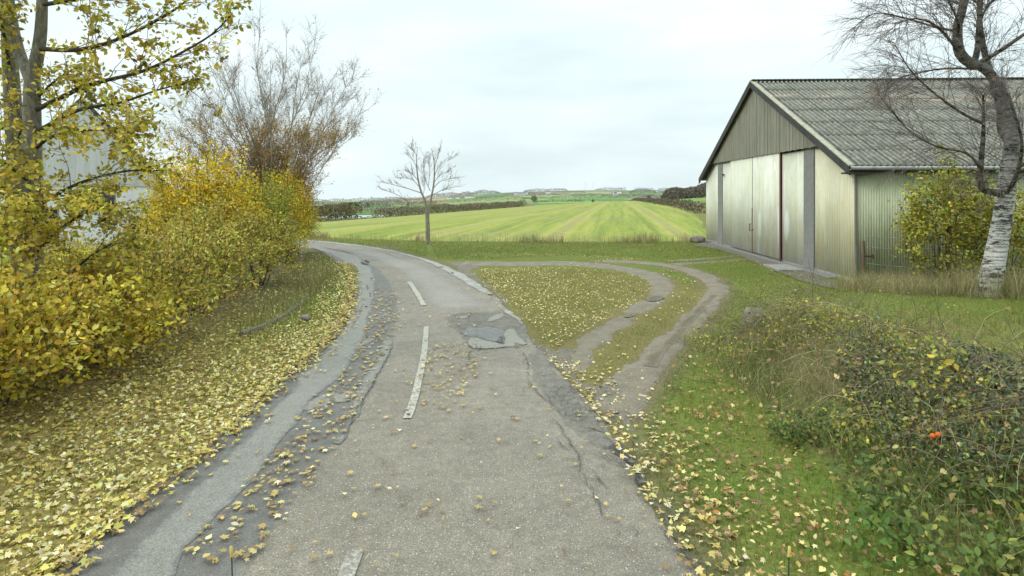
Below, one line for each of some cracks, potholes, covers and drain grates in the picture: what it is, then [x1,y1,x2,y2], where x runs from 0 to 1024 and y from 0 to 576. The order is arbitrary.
crack [523,379,734,573]
